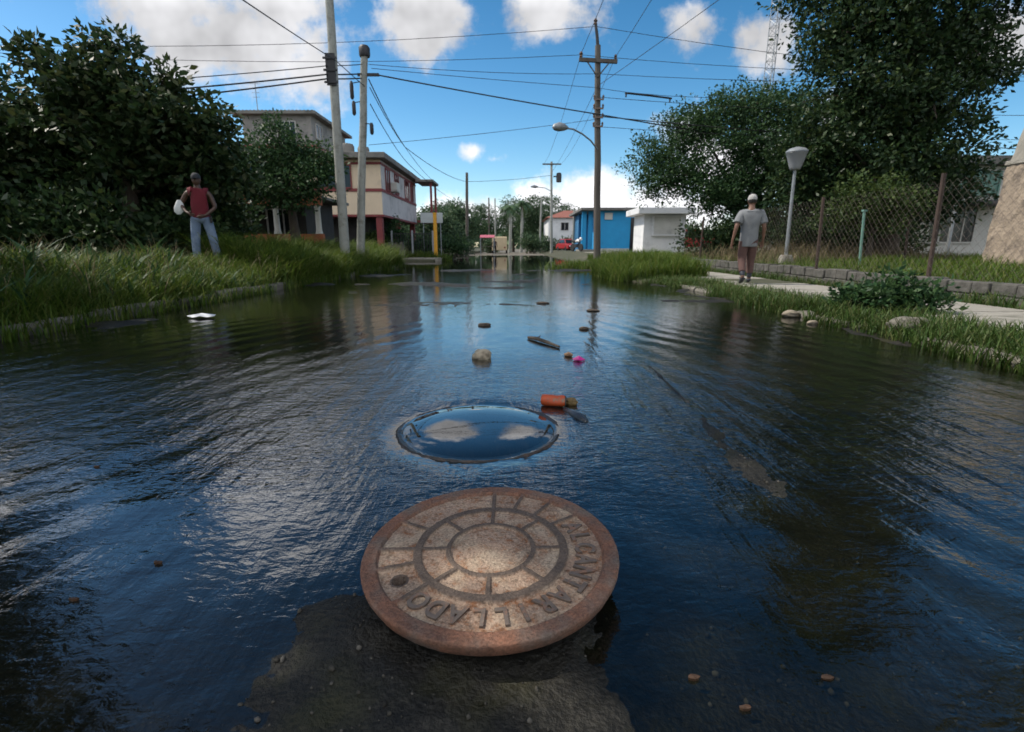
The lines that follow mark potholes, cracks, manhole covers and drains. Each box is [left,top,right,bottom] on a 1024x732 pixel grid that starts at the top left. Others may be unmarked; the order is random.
manhole cover [394,405,563,468]
manhole cover [360,487,619,656]
